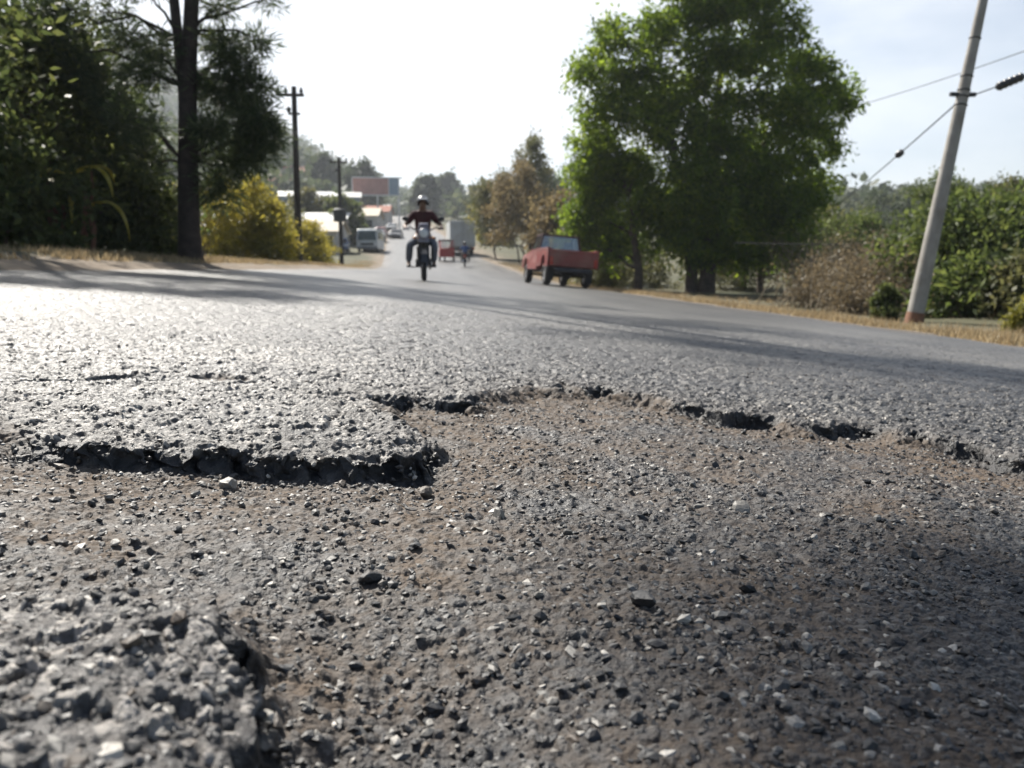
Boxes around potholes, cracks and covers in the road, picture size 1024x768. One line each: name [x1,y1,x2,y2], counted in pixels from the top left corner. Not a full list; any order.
pothole [0,380,1024,768]
crack [10,370,181,383]
